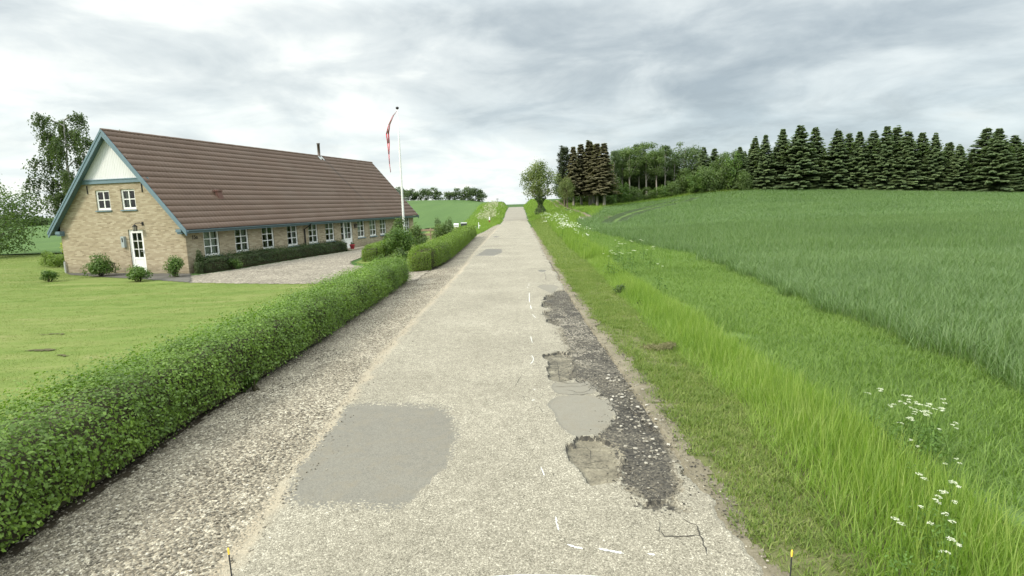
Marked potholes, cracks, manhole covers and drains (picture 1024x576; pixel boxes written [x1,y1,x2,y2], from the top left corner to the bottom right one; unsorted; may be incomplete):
pothole [565,435,626,486]
crack [659,517,707,554]
pothole [542,351,579,382]
